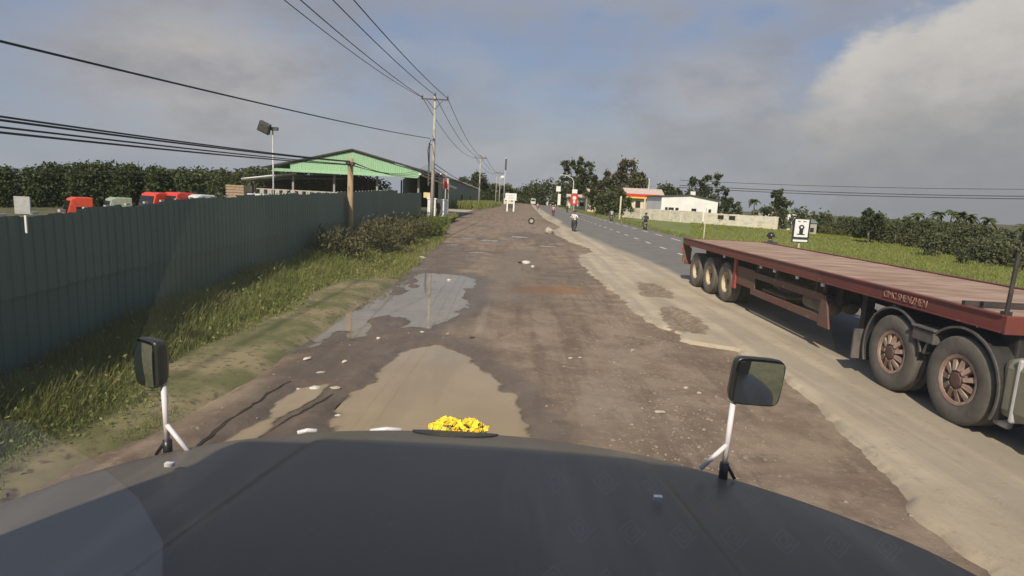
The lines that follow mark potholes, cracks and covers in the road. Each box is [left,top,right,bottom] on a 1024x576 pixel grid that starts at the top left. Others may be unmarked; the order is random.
crack [196,381,332,447]
pothole [285,335,576,444]
pothole [286,269,496,355]
